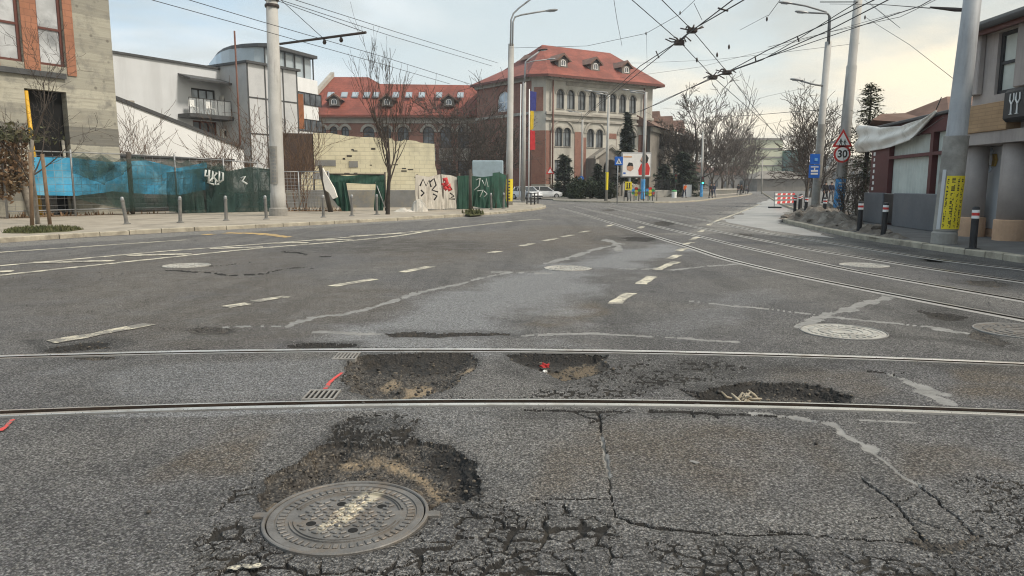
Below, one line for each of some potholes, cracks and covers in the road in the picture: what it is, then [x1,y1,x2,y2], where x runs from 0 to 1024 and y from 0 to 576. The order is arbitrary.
pothole [340,350,479,404]
crack [188,359,1024,576]
manhole cover [252,481,440,558]
manhole cover [799,323,889,341]
pothole [257,438,483,512]
pothole [678,381,853,404]
manhole cover [972,322,1024,339]
pothole [507,353,615,381]
drain grate [301,389,341,401]
drain grate [332,352,361,363]
